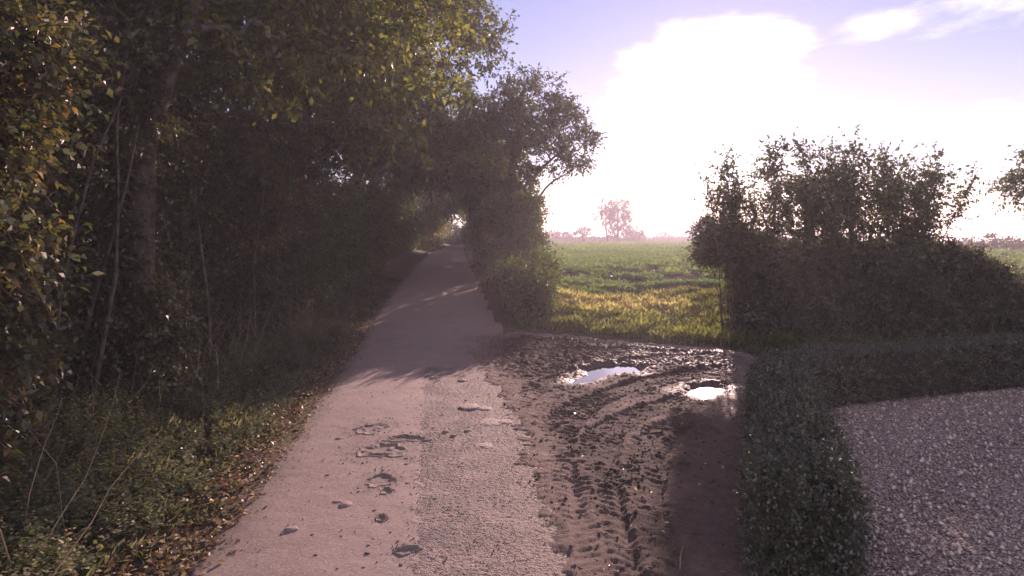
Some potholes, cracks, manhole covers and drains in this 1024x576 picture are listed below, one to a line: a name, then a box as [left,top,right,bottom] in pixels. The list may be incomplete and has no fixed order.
pothole [353,422,391,435]
pothole [356,442,410,458]
pothole [392,545,422,556]
pothole [365,472,398,488]
pothole [382,434,431,442]
